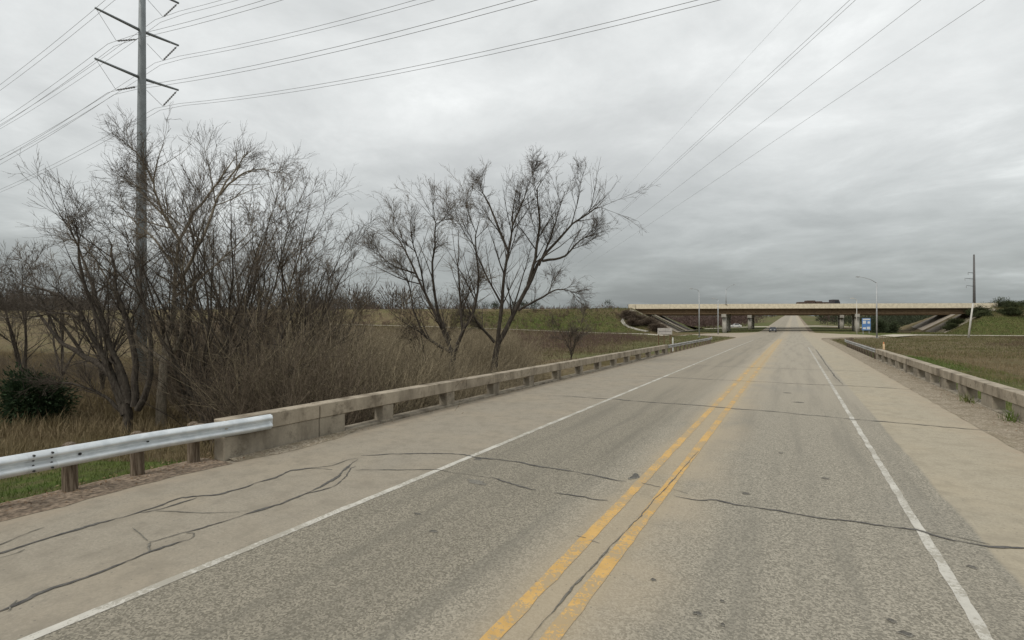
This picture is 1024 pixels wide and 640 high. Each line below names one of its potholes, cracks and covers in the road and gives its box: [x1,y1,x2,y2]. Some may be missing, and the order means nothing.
crack [650,365,912,390]
crack [132,497,220,551]
crack [644,483,1024,548]
crack [306,453,620,500]
crack [547,395,988,431]
